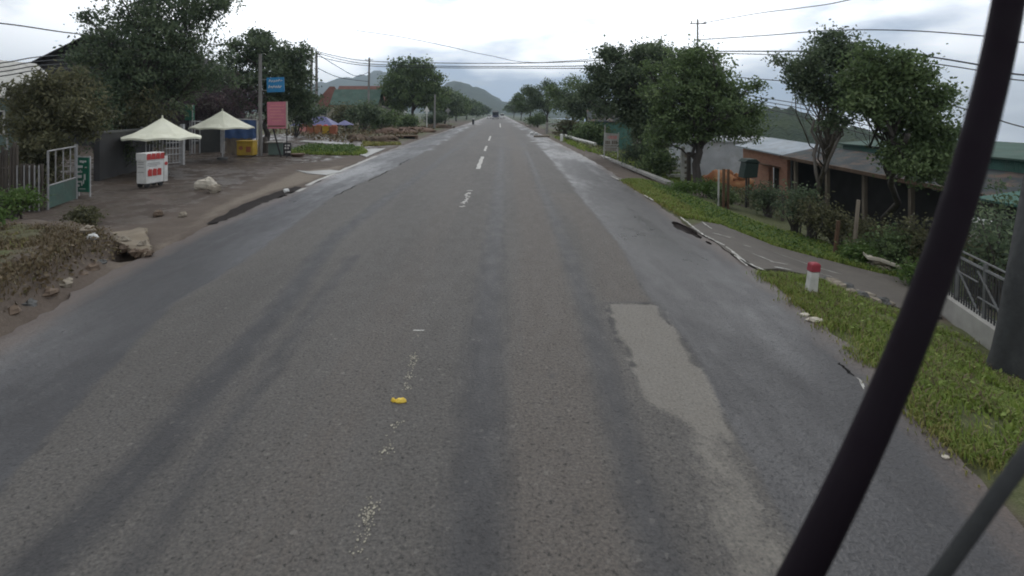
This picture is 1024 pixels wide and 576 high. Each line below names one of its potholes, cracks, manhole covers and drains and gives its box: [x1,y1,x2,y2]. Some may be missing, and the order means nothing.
pothole [671,221,702,239]
